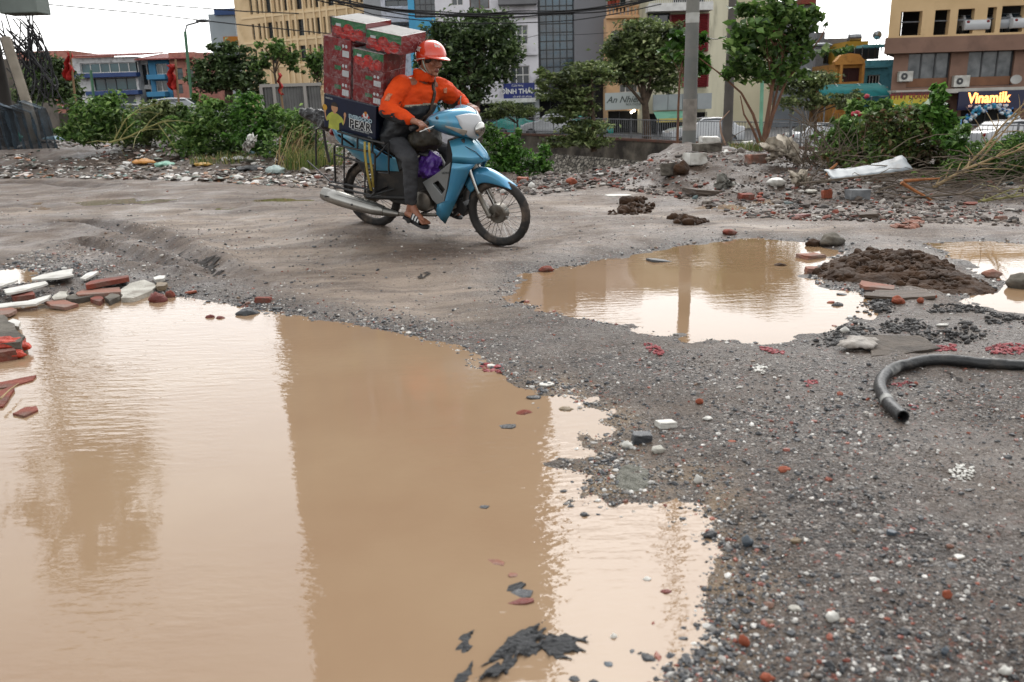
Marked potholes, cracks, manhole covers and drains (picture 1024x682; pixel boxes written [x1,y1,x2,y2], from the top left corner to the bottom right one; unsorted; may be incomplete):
pothole [502,237,878,346]
pothole [0,290,771,682]
pothole [918,239,1024,317]
